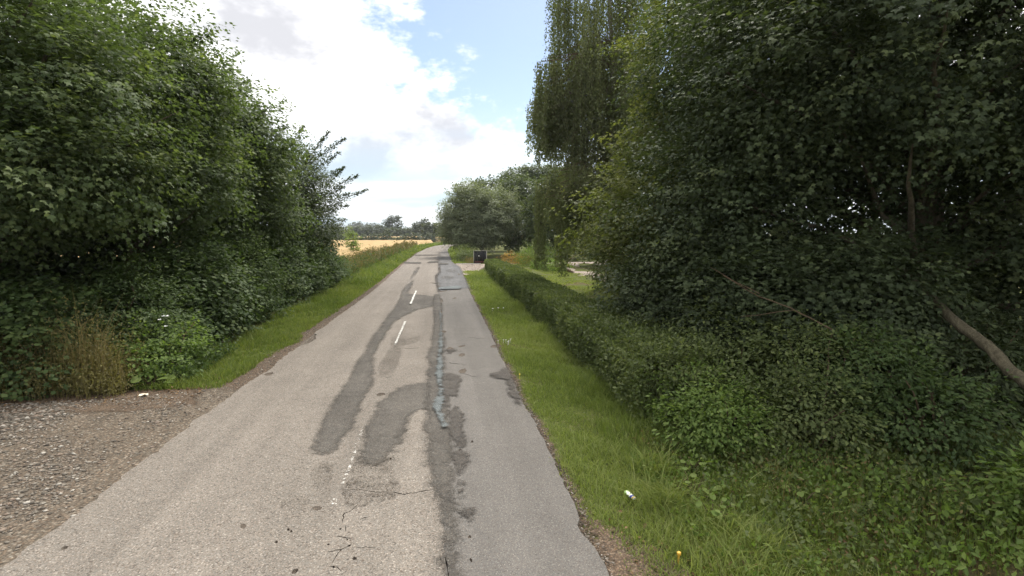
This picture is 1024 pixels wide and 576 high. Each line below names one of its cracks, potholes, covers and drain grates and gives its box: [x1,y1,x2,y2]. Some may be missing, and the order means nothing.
crack [330,489,375,570]
